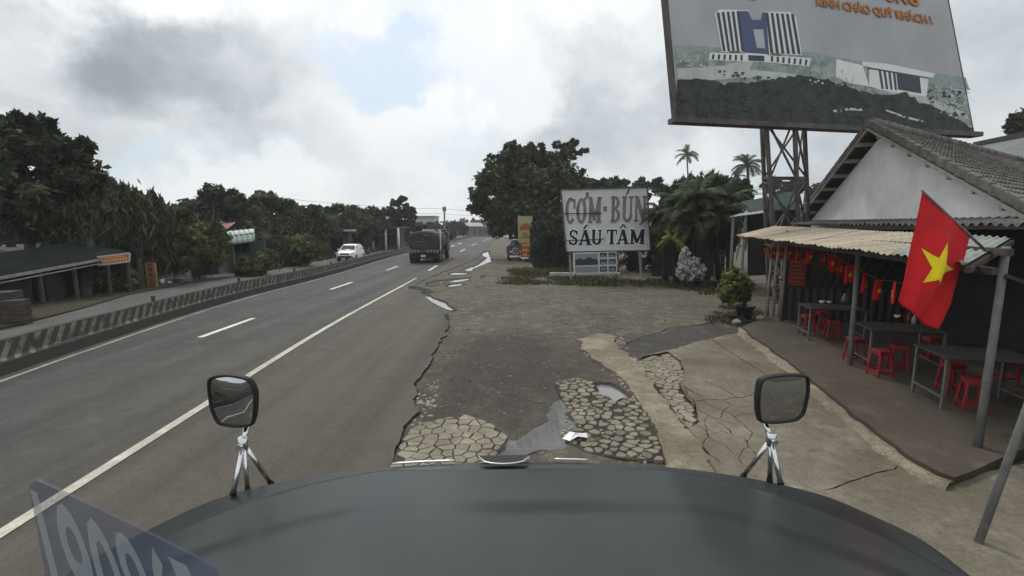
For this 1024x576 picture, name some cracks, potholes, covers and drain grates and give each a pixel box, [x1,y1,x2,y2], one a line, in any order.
pothole [462,251,492,271]
crack [554,351,756,465]
pothole [497,400,576,455]
crack [390,326,507,467]
pothole [423,293,457,312]
pothole [425,277,471,287]
pothole [593,381,630,402]
crack [824,466,899,491]
